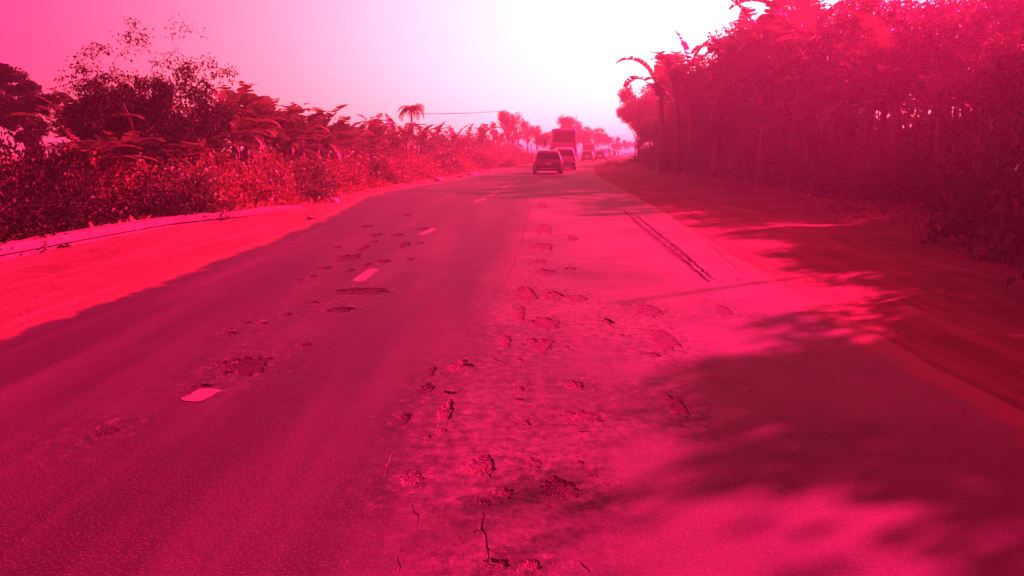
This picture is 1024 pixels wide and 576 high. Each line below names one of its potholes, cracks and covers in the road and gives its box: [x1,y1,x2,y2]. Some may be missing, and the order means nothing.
pothole [662,391,691,419]
pothole [91,426,120,438]
pothole [398,470,426,486]
pothole [557,409,606,424]
pothole [647,329,684,352]
pothole [539,475,581,499]
pothole [332,287,391,295]
pothole [525,317,561,330]
crack [473,512,491,558]
pothole [465,454,497,478]
crack [382,448,396,479]
pothole [513,285,539,303]
